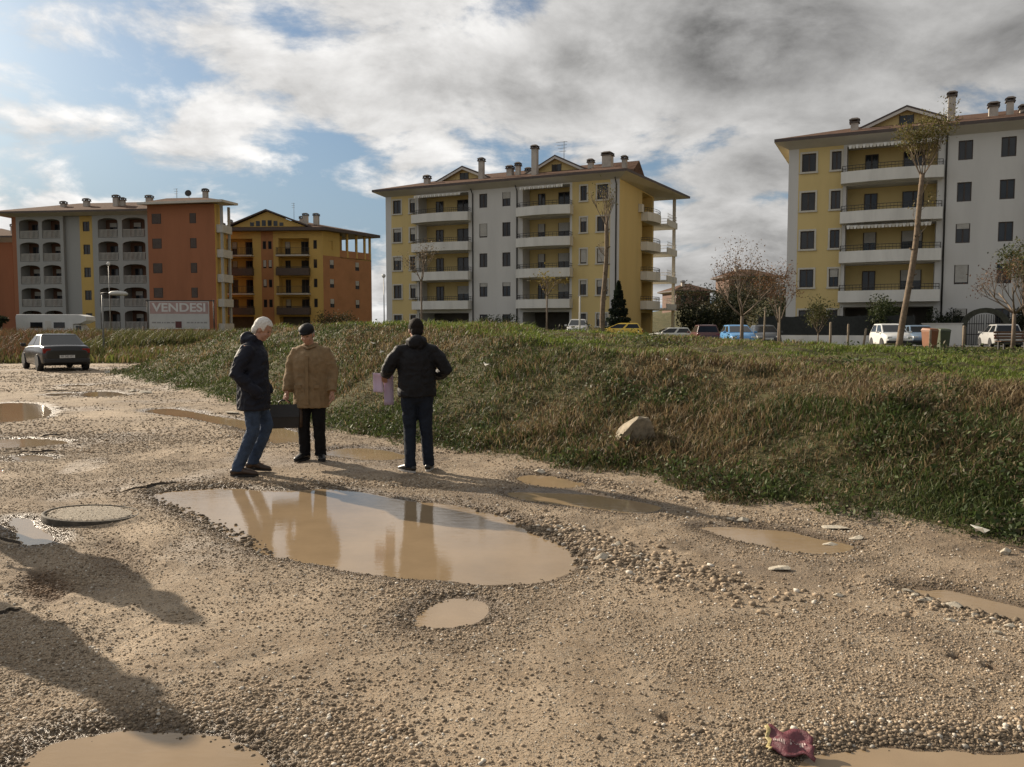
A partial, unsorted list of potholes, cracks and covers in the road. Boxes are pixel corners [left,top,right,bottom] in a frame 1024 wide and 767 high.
pothole [0,437,75,448]
pothole [405,594,498,630]
pothole [0,401,66,423]
pothole [513,474,591,489]
pothole [778,736,1024,767]
pothole [6,515,64,547]
pothole [6,720,294,767]
manhole cover [41,504,139,527]
pothole [326,447,405,460]
pothole [150,486,589,588]
pothole [501,486,668,514]
pothole [696,524,865,556]
